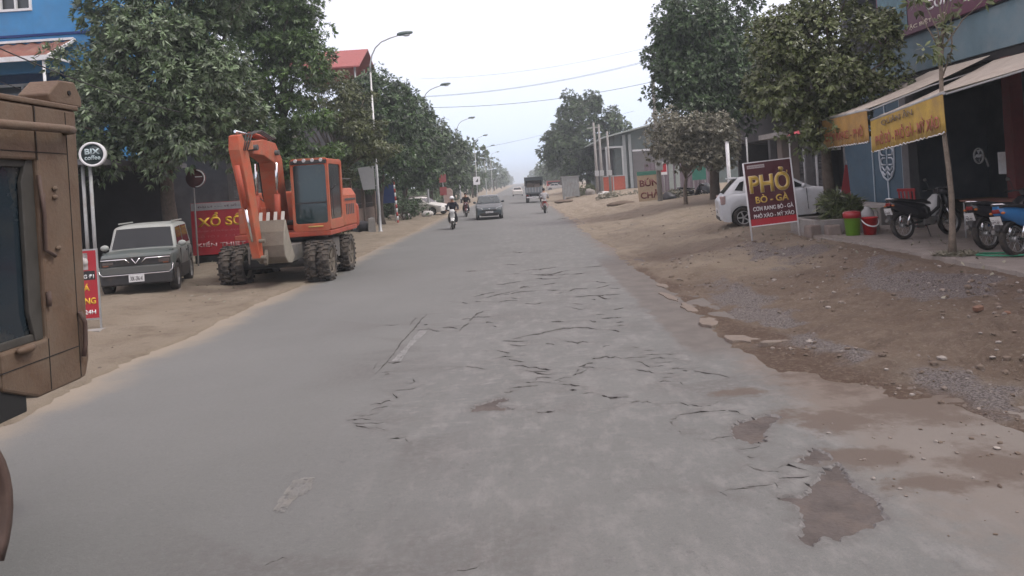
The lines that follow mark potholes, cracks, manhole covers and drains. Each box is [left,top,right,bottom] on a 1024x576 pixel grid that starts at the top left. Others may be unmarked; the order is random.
pothole [729,414,783,444]
pothole [469,397,516,412]
crack [349,252,729,441]
crack [712,436,809,496]
pothole [775,462,891,547]
pothole [794,447,833,466]
crack [670,403,740,433]
